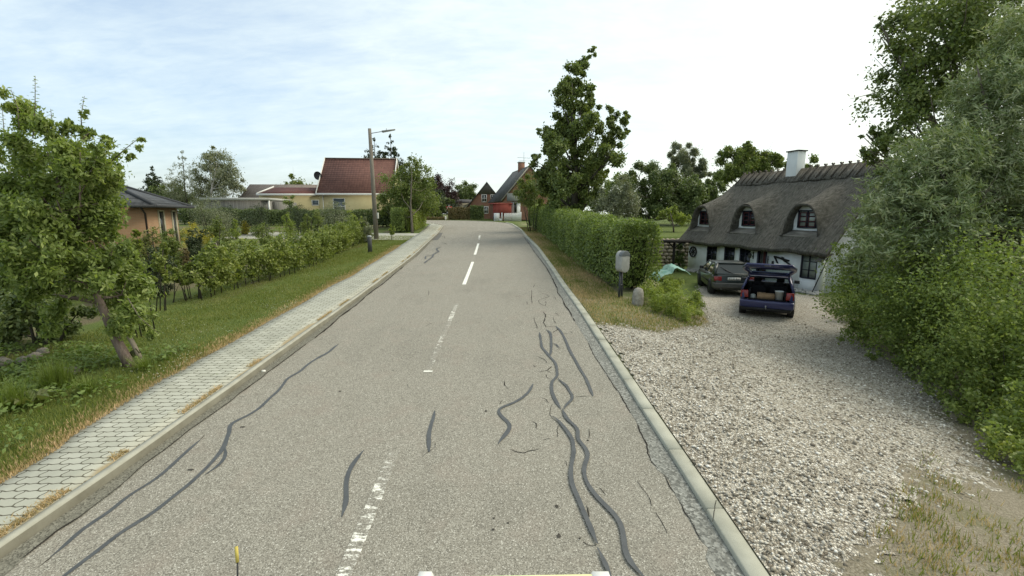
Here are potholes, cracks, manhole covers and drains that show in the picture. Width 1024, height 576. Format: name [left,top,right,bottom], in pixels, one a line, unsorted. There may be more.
crack [588,343,717,538]
crack [525,239,575,332]
